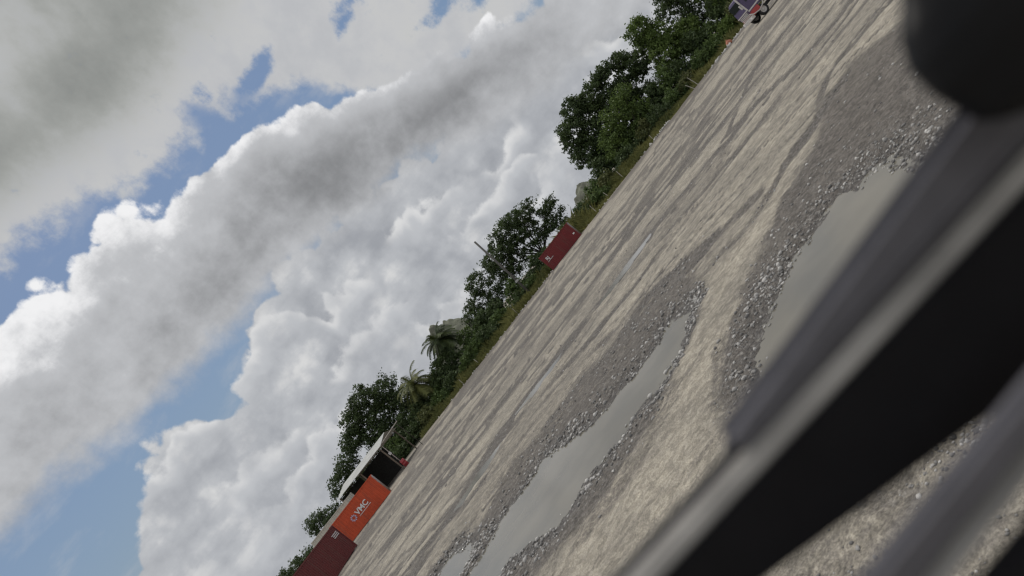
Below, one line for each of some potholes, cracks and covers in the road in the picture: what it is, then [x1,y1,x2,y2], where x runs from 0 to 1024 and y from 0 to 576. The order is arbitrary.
pothole [750,149,923,377]
pothole [467,297,699,576]
pothole [436,539,476,576]
